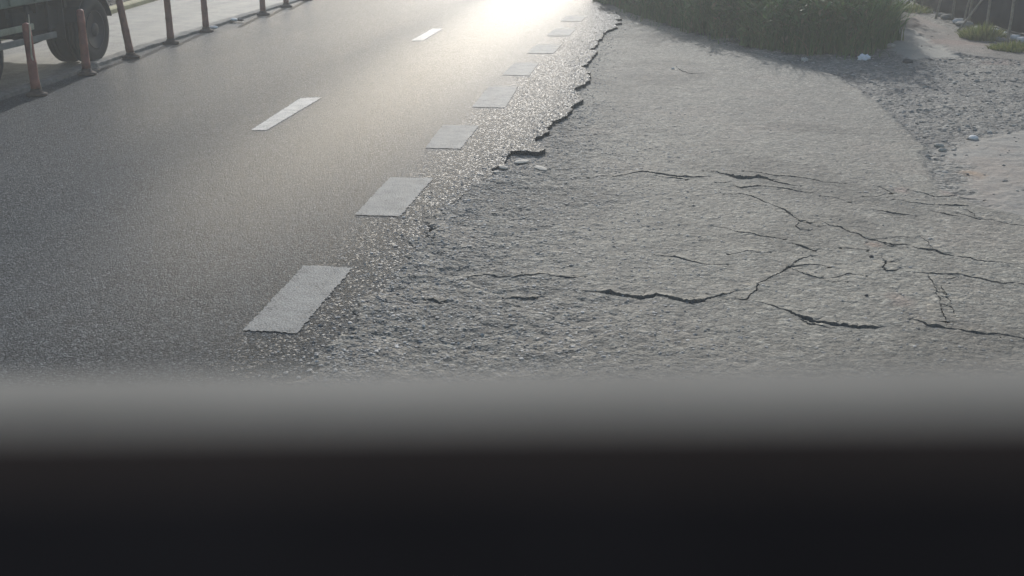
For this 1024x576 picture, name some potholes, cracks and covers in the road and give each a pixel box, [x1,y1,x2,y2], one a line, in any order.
crack [424,169,1024,343]
